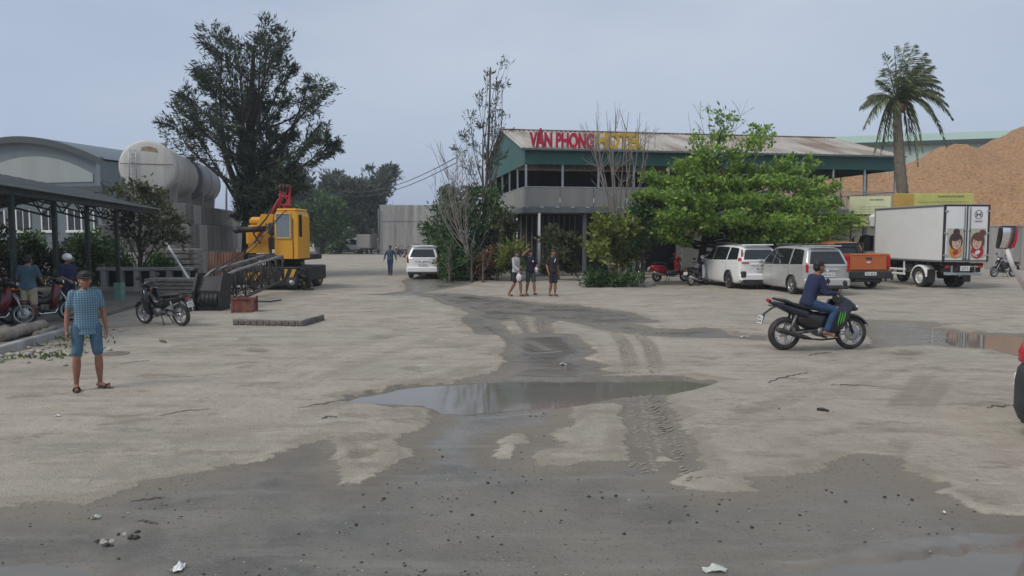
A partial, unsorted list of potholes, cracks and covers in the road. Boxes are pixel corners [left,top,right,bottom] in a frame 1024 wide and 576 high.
pothole [323,373,736,420]
pothole [931,327,1024,357]
